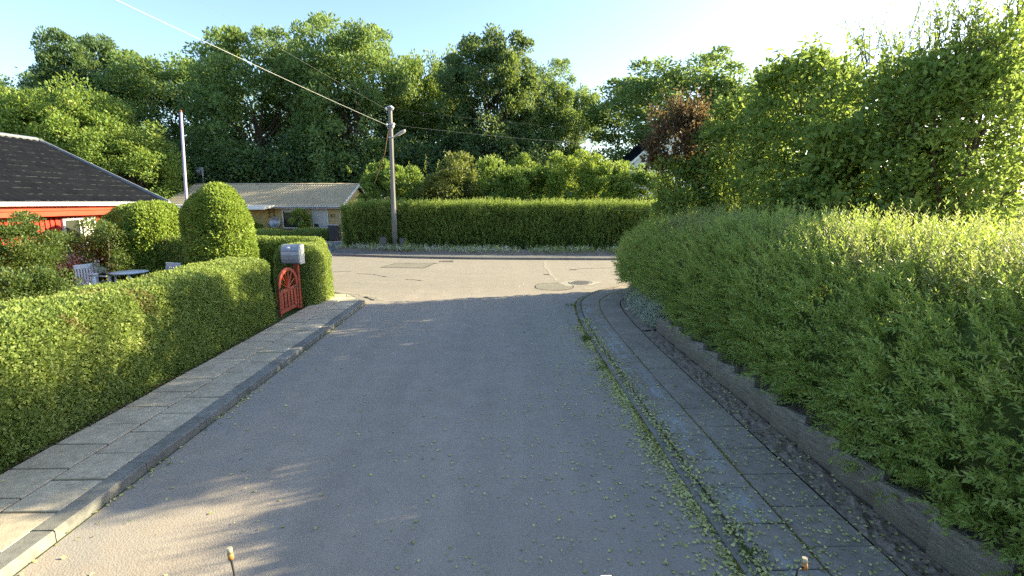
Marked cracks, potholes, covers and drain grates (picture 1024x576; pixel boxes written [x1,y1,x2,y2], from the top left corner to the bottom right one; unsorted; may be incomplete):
crack [543,261,589,281]
